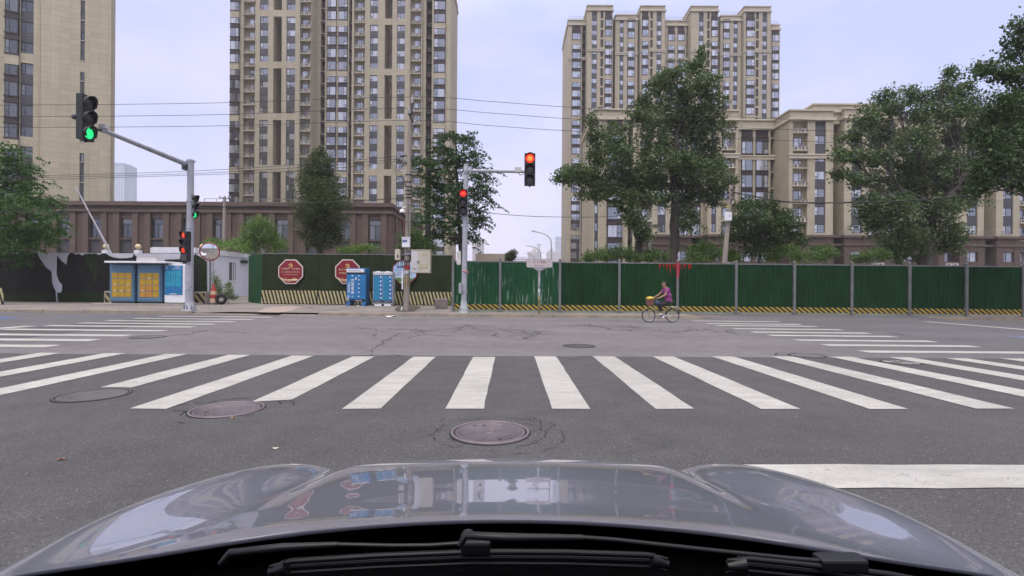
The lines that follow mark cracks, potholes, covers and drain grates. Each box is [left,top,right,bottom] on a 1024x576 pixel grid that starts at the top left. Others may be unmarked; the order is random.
crack [356,325,548,352]
manhole cover [186,401,266,419]
crack [425,416,565,454]
manhole cover [449,420,531,446]
manhole cover [50,388,133,403]
